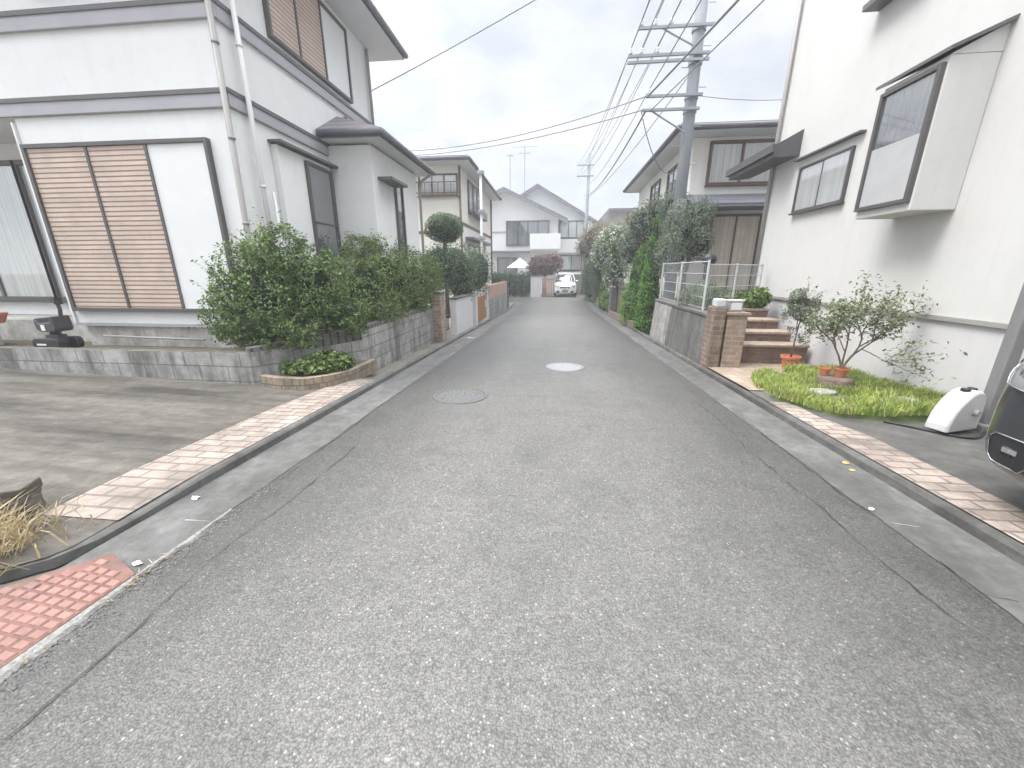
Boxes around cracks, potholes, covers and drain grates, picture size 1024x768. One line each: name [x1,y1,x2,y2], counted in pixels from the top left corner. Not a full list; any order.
manhole cover [433,388,488,404]
crack [697,402,1019,647]
manhole cover [546,363,584,371]
crack [0,388,406,743]
